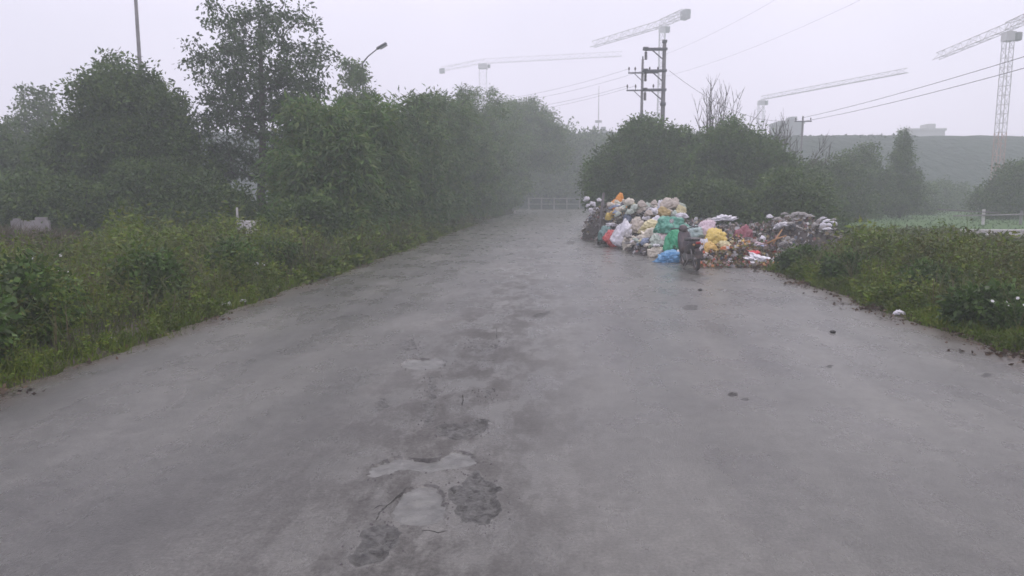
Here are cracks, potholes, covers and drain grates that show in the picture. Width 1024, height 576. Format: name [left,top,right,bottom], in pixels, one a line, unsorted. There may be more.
pothole [390,484,450,526]
crack [374,485,410,520]
pothole [448,470,503,525]
pothole [346,525,402,567]
pothole [436,418,490,440]
